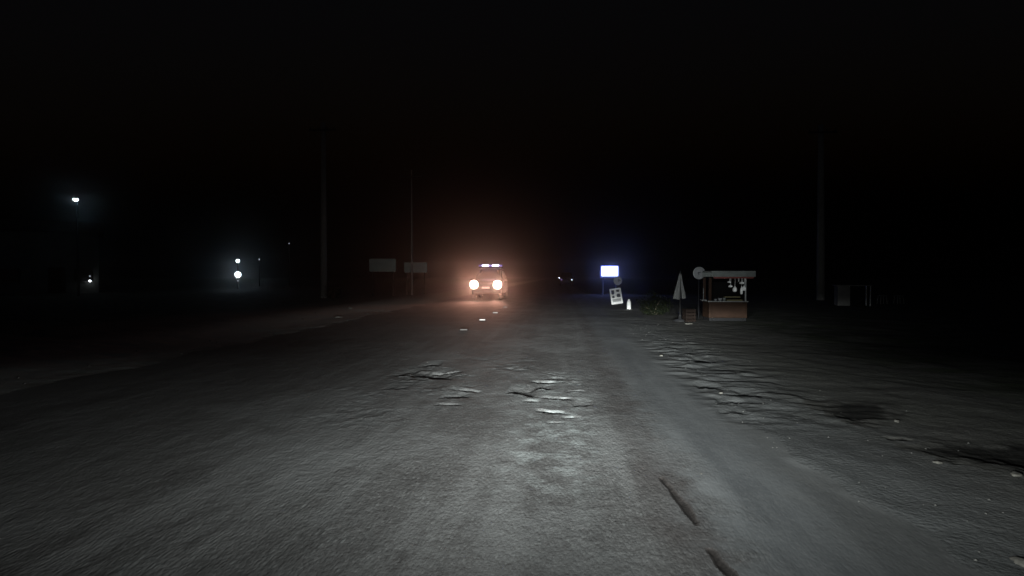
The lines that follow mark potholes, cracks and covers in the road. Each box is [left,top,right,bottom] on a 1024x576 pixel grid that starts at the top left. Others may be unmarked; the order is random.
pothole [799,399,909,429]
crack [704,547,739,576]
crack [658,476,700,526]
pothole [437,388,476,399]
pothole [533,407,572,415]
pothole [384,365,465,380]
